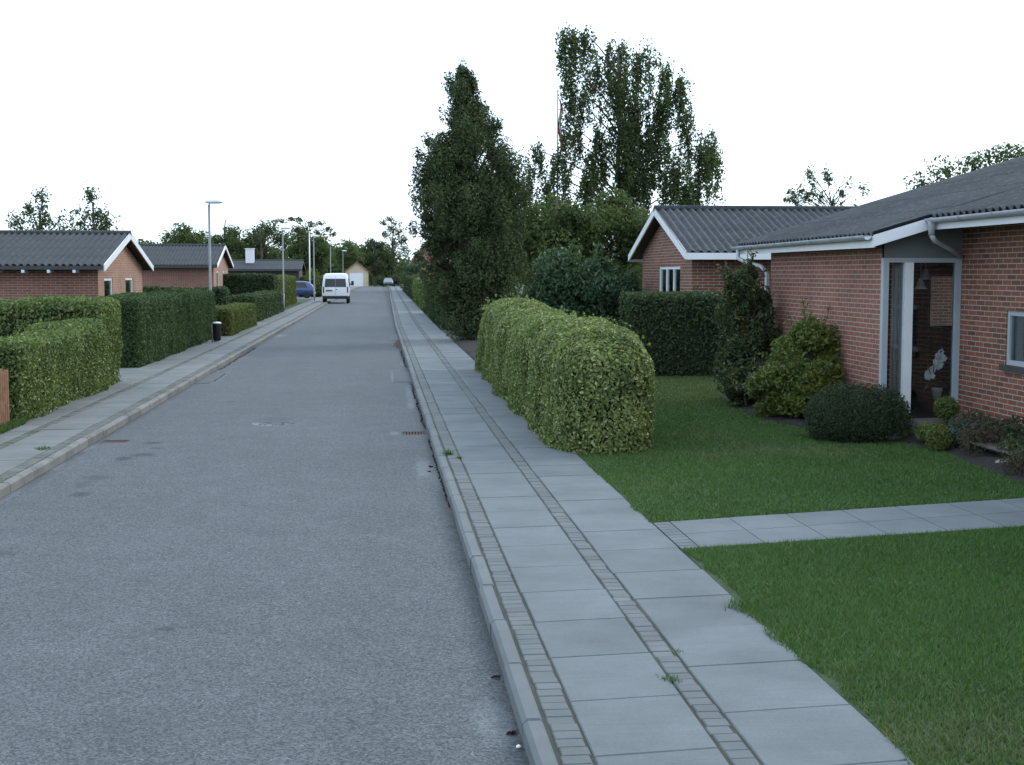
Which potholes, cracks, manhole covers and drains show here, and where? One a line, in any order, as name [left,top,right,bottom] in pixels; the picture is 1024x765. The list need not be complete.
crack [201,348,256,384]
